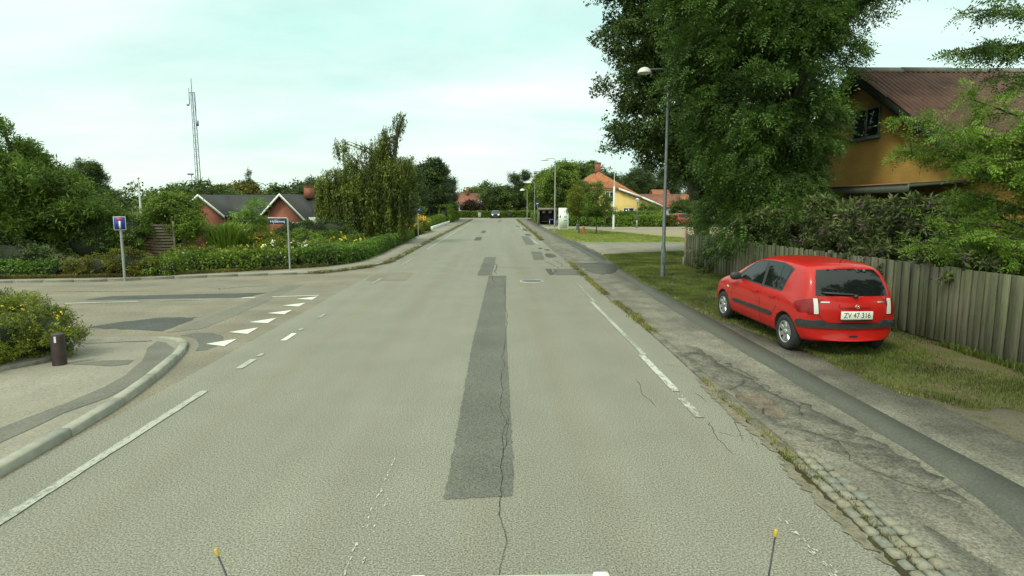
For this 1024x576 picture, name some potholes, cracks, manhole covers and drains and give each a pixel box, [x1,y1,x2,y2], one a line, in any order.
crack [498,289,509,576]
